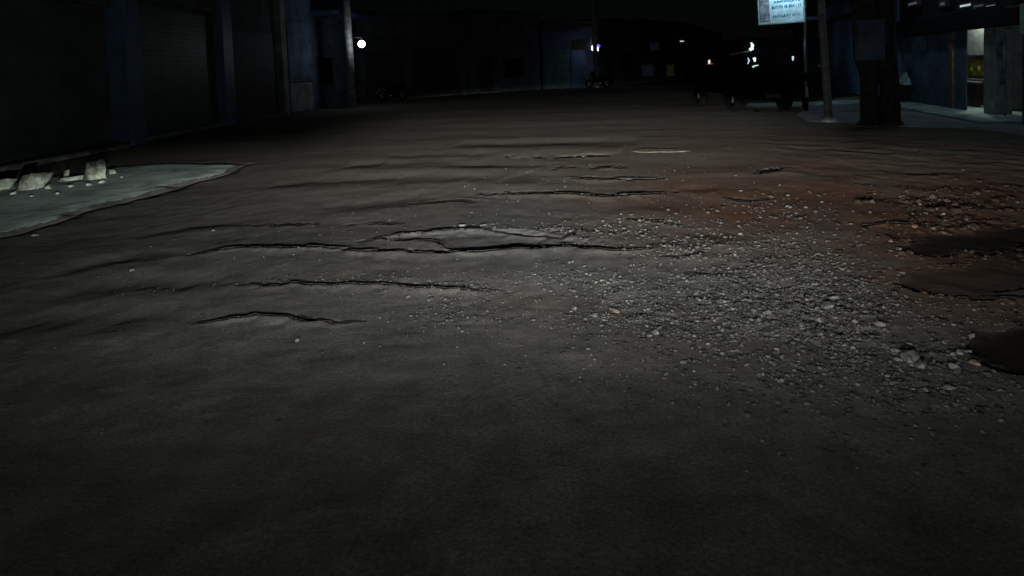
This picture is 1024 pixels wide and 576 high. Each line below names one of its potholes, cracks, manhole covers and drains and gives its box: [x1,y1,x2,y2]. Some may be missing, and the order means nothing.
crack [190,155,723,276]
pothole [898,259,1024,299]
crack [238,281,507,293]
pothole [889,229,1024,256]
pothole [967,319,1024,373]
crack [188,312,362,324]
